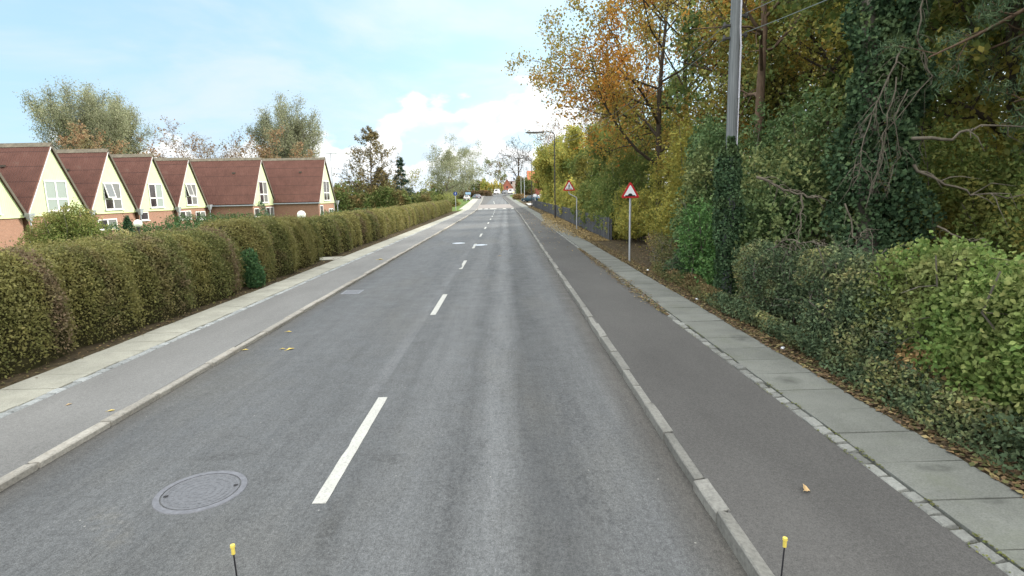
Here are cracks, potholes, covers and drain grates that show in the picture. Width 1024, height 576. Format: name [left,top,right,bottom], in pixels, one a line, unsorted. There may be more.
manhole cover [152,471,248,515]
